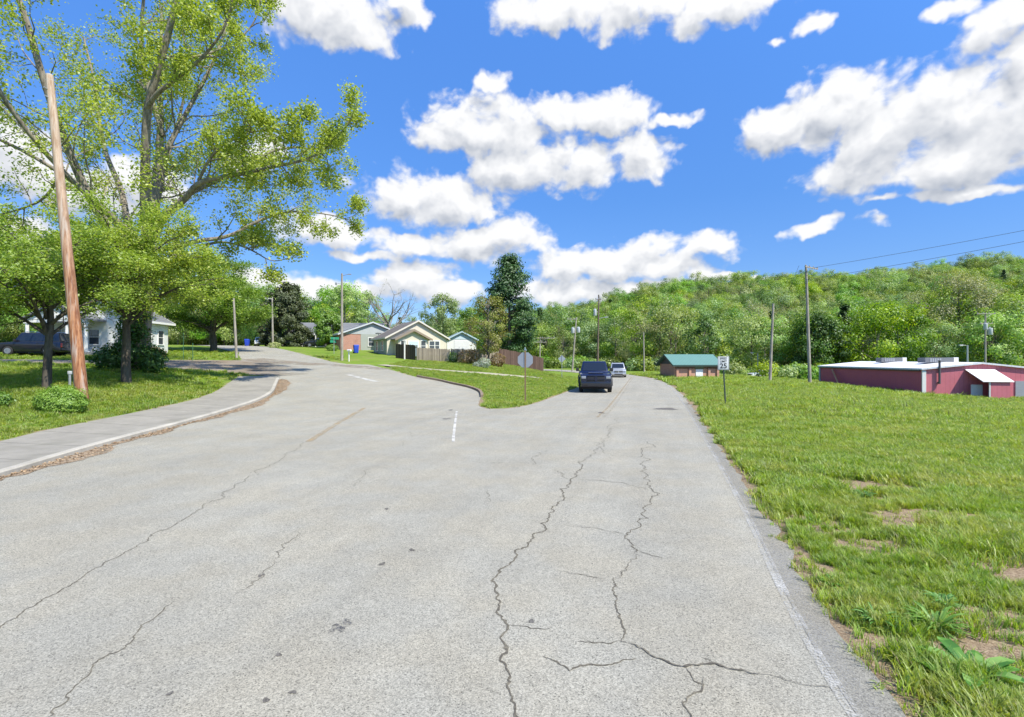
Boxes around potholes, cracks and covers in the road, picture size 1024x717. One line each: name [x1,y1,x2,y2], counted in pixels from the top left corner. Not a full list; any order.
crack [481,419,840,717]
crack [50,606,166,716]
